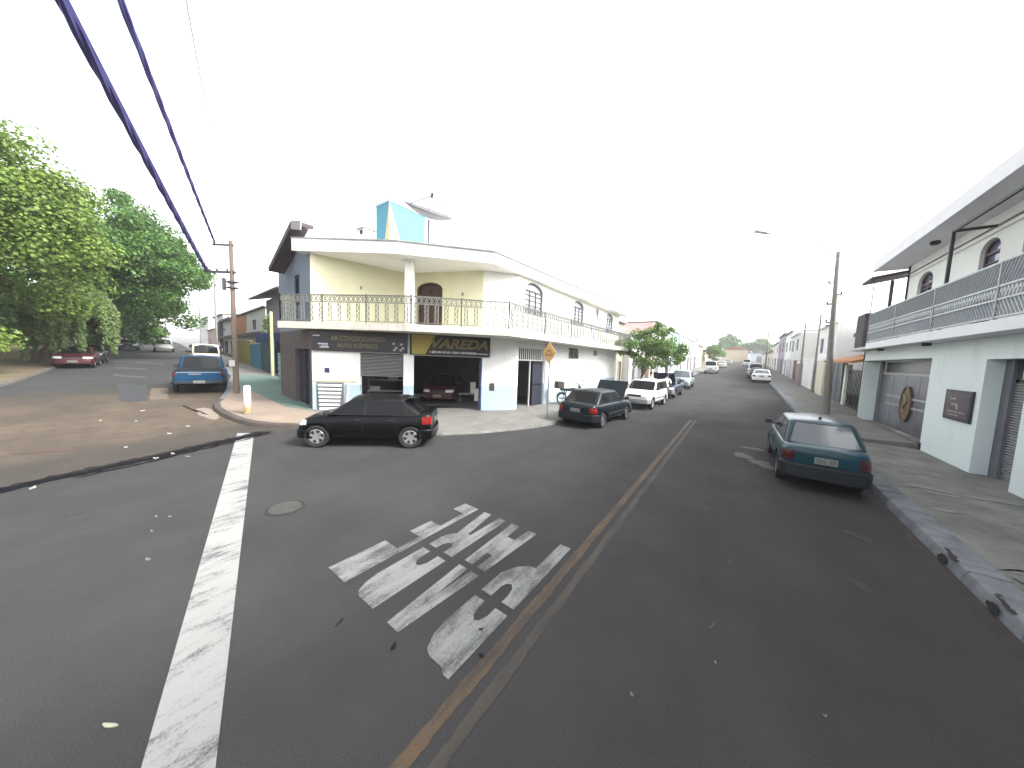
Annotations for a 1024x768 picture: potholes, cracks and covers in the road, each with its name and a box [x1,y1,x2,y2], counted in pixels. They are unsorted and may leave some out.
manhole cover [264,500,305,516]
